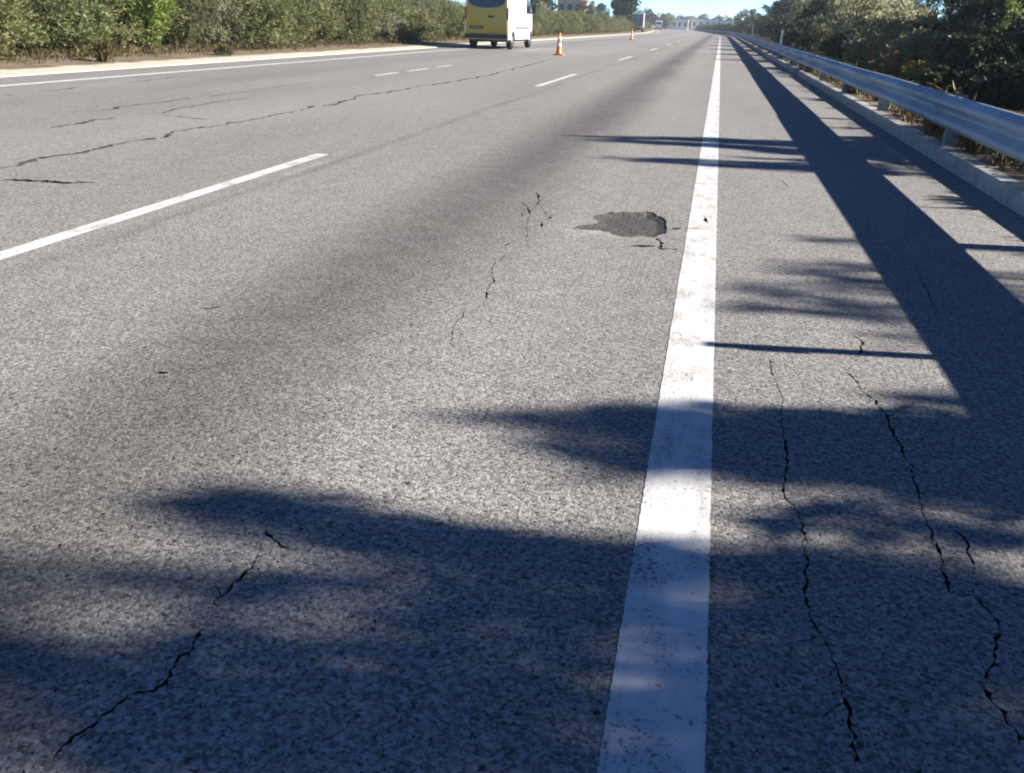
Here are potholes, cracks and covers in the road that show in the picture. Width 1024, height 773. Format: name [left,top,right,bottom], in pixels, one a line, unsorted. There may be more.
crack [0,58,554,184]
crack [844,333,1024,745]
pothole [572,211,668,237]
crack [53,530,290,763]
crack [443,193,552,346]
crack [768,357,860,767]
